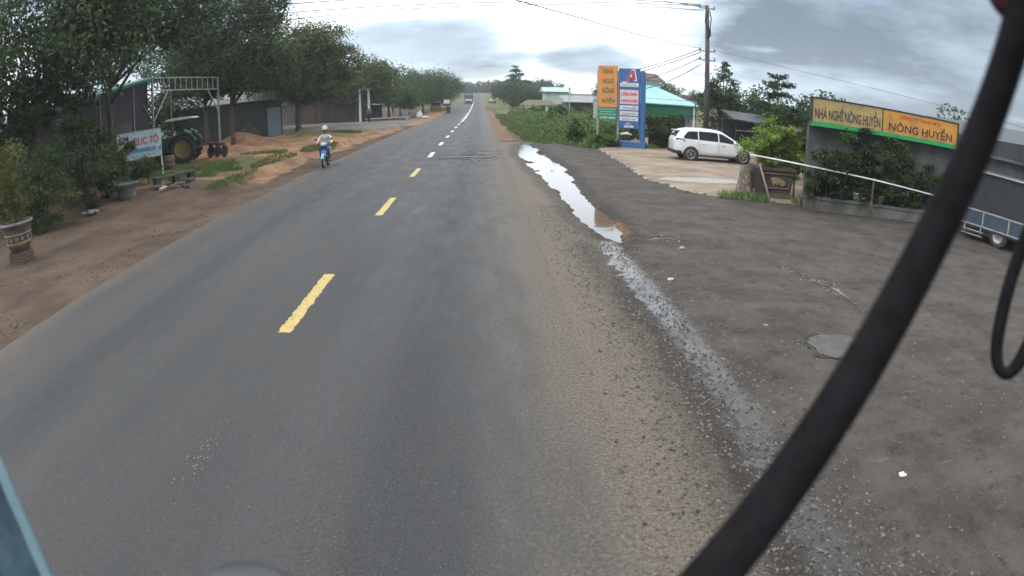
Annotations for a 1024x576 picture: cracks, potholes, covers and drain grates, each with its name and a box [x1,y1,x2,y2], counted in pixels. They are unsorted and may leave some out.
crack [782,266,863,312]
